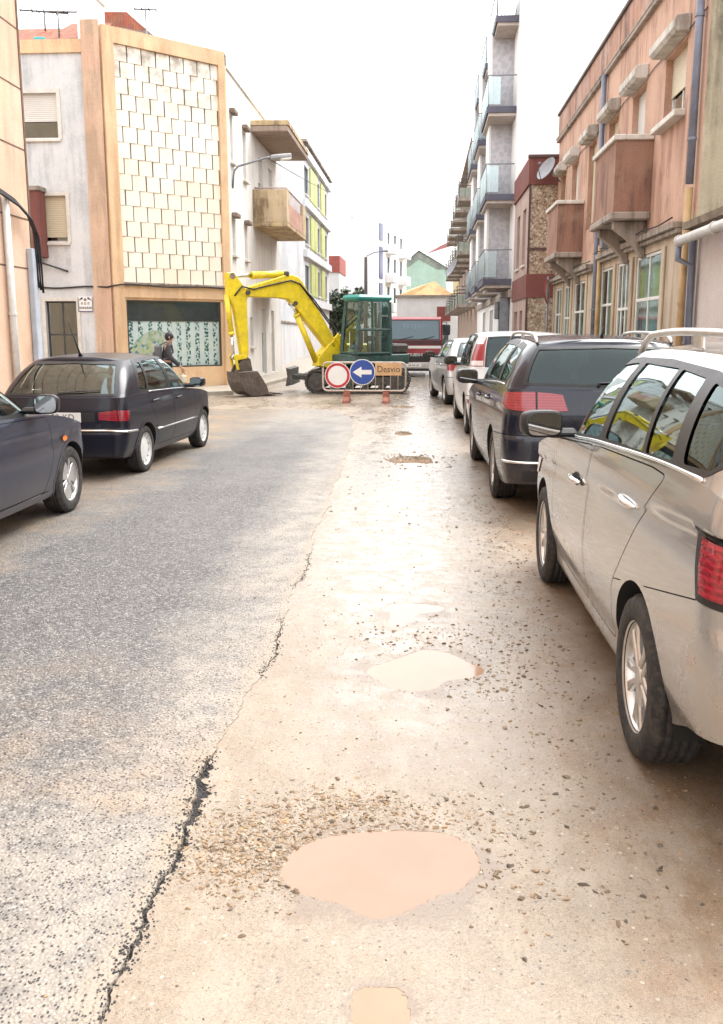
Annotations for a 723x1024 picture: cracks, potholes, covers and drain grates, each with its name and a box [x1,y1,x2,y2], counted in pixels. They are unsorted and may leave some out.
pothole [366,649,484,691]
pothole [279,830,481,919]
pothole [387,456,433,466]
crack [89,552,312,1024]
pothole [350,986,411,1024]
